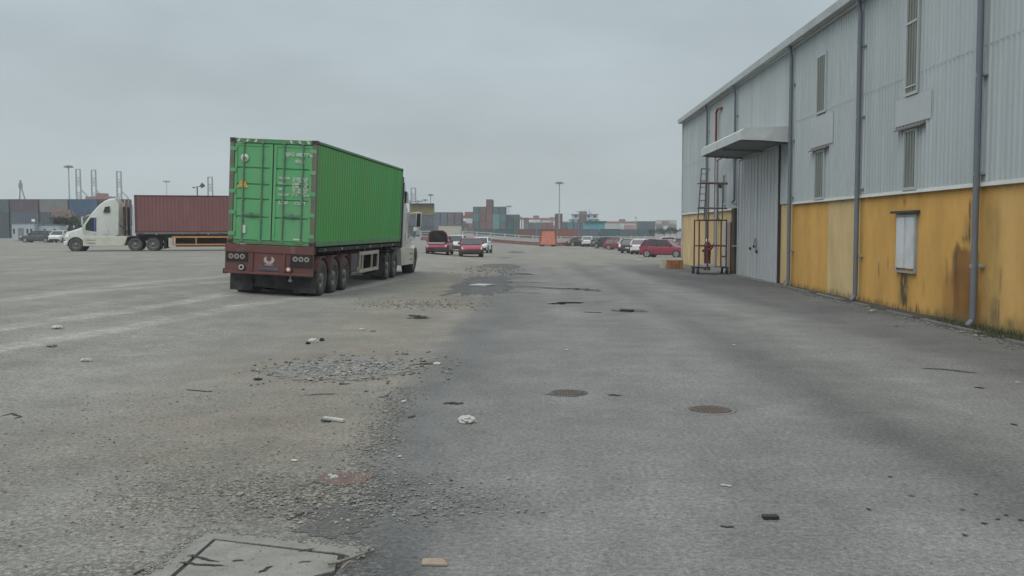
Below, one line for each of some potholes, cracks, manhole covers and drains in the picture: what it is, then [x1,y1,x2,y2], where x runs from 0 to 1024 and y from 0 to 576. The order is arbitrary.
manhole cover [685,405,736,415]
pothole [267,355,418,382]
manhole cover [144,530,369,576]
